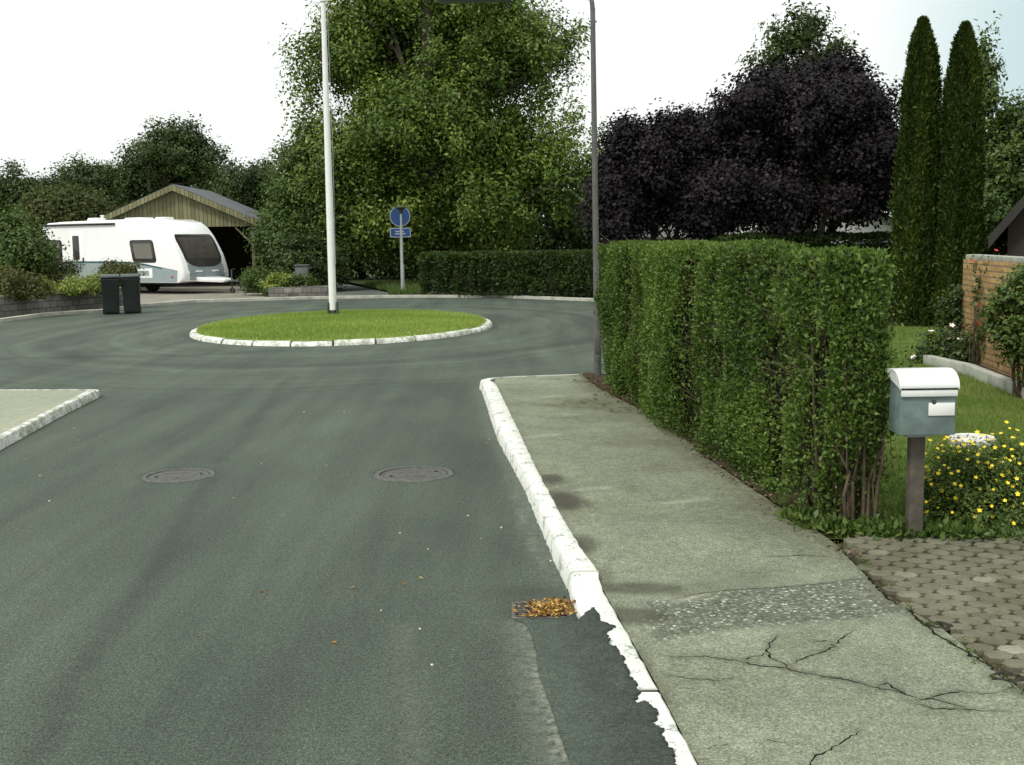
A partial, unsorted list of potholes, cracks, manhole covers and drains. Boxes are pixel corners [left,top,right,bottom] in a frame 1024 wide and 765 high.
crack [810,731,859,765]
drain grate [511,601,571,619]
manhole cover [141,468,216,483]
crack [690,631,990,711]
manhole cover [373,466,454,482]
